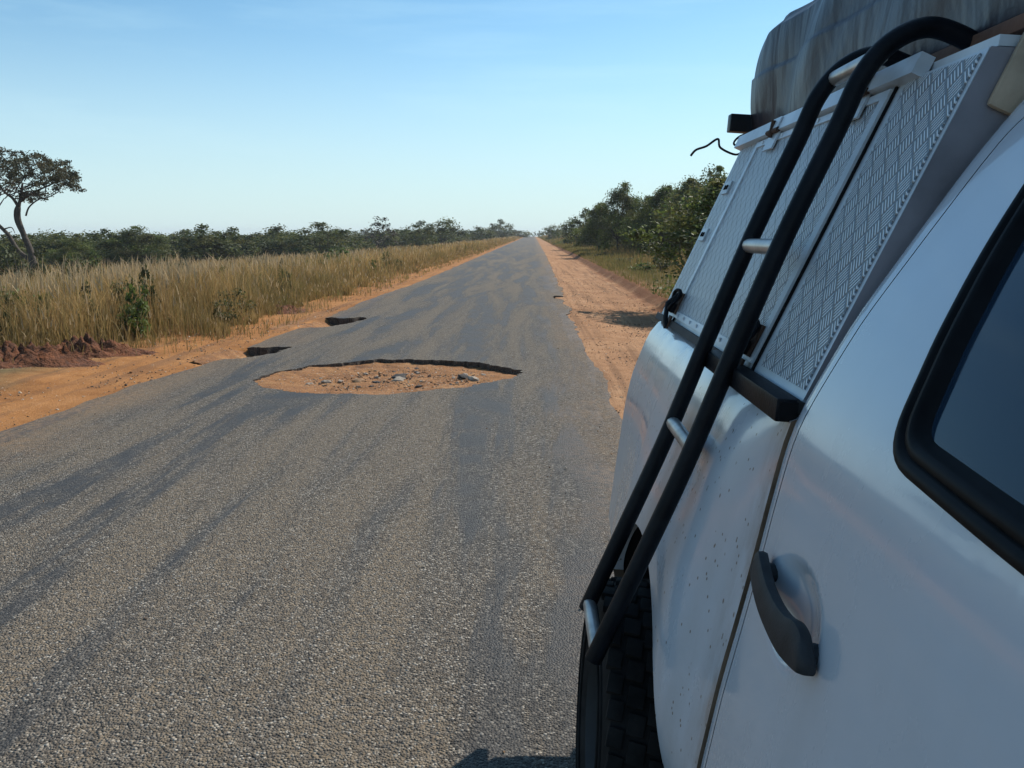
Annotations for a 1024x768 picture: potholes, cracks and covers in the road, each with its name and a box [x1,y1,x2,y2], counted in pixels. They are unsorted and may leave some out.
pothole [255,362,517,395]
